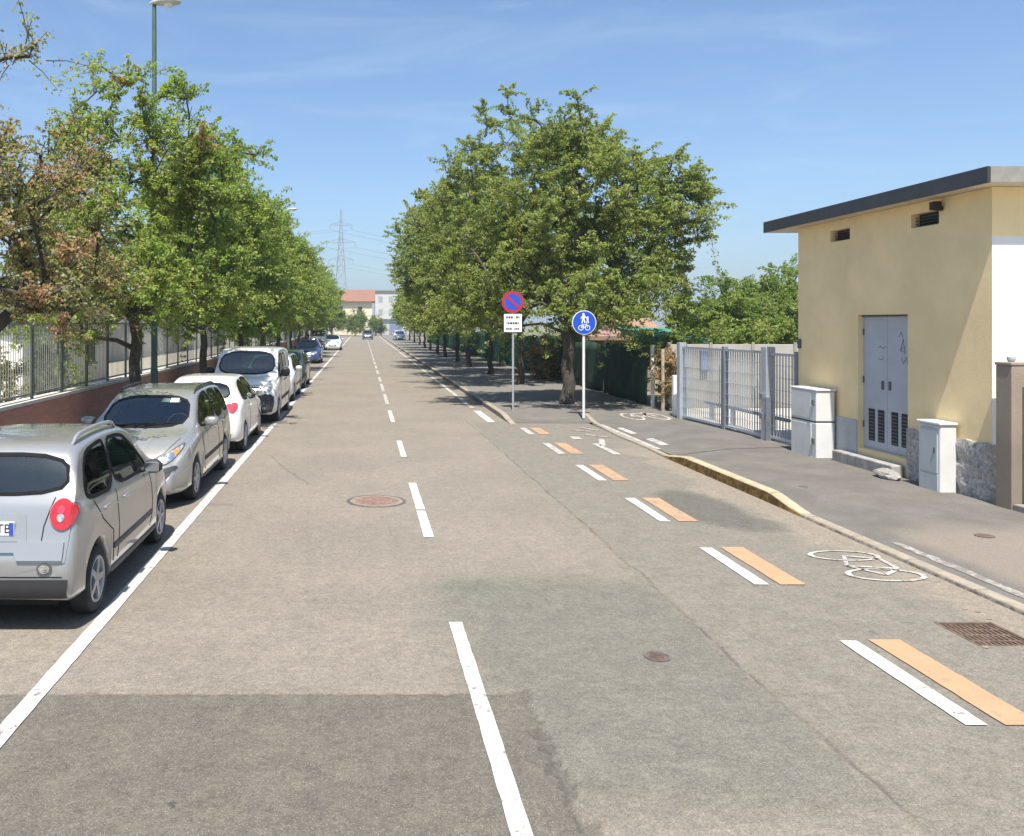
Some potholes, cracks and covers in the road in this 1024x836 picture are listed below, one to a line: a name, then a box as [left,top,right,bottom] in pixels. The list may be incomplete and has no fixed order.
manhole cover [347,495,406,508]
utility cover [644,651,671,662]
drain grate [934,622,1024,646]
